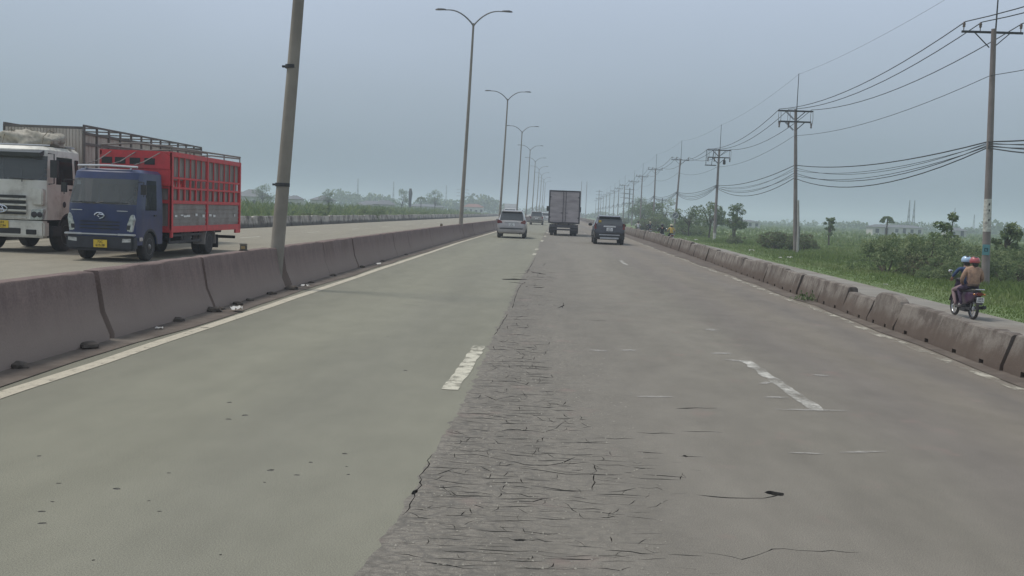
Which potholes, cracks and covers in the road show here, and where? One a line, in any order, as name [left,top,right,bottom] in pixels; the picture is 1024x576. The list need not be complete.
crack [711,548,858,560]
